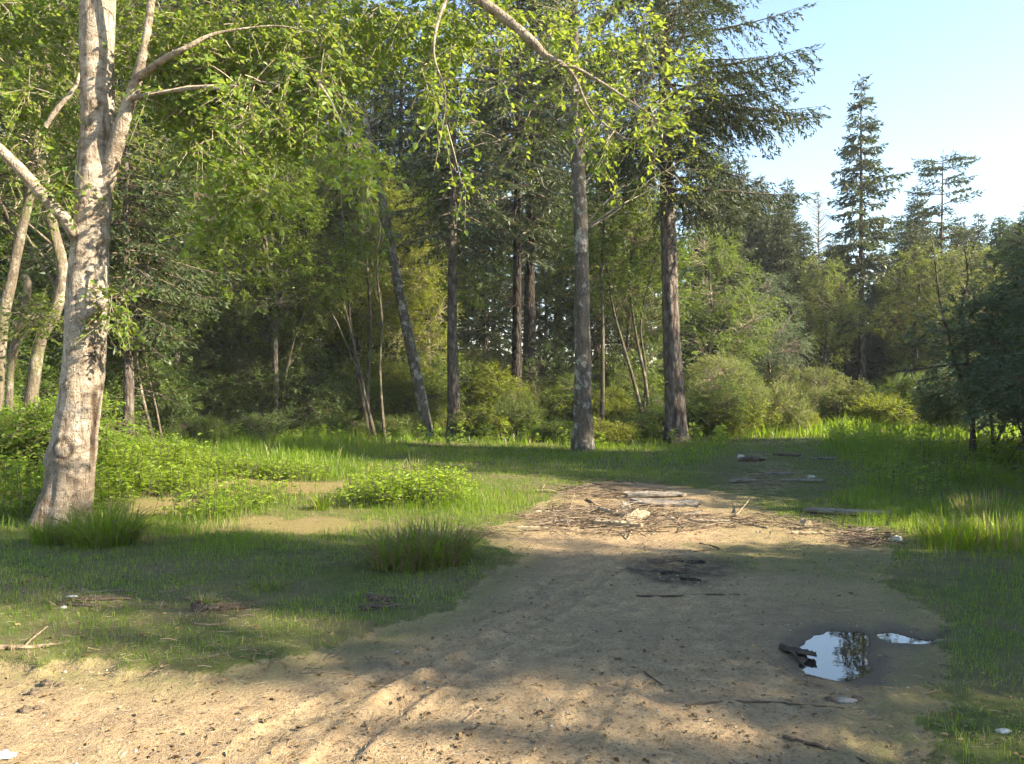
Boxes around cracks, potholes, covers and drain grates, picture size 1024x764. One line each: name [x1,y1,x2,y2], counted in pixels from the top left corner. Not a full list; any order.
pothole [787,626,884,683]
pothole [871,627,958,645]
